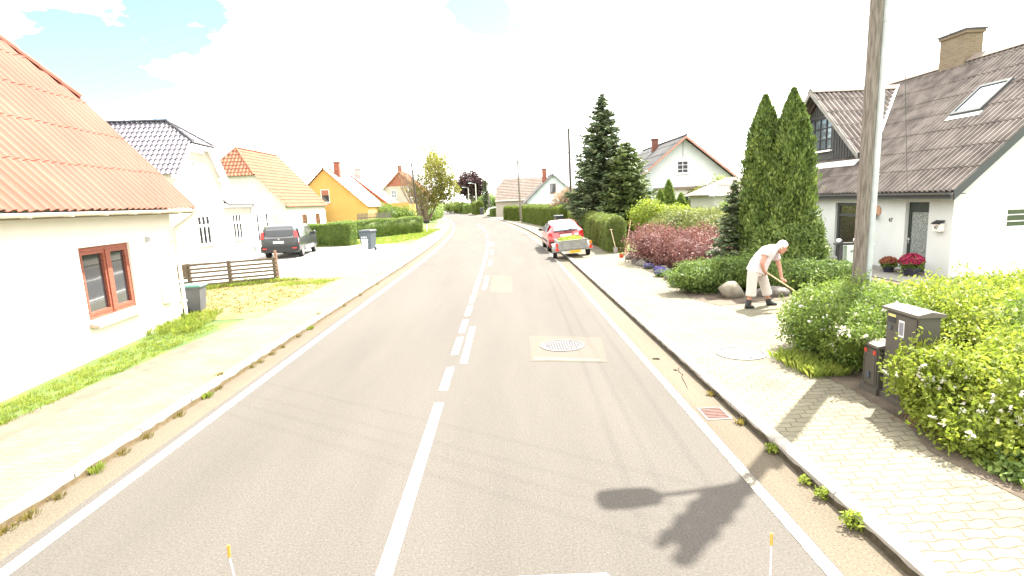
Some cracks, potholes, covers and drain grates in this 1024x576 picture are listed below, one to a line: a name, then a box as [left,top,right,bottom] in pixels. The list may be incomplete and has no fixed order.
manhole cover [540,339,585,352]
manhole cover [715,347,767,361]
drain grate [696,407,733,420]
